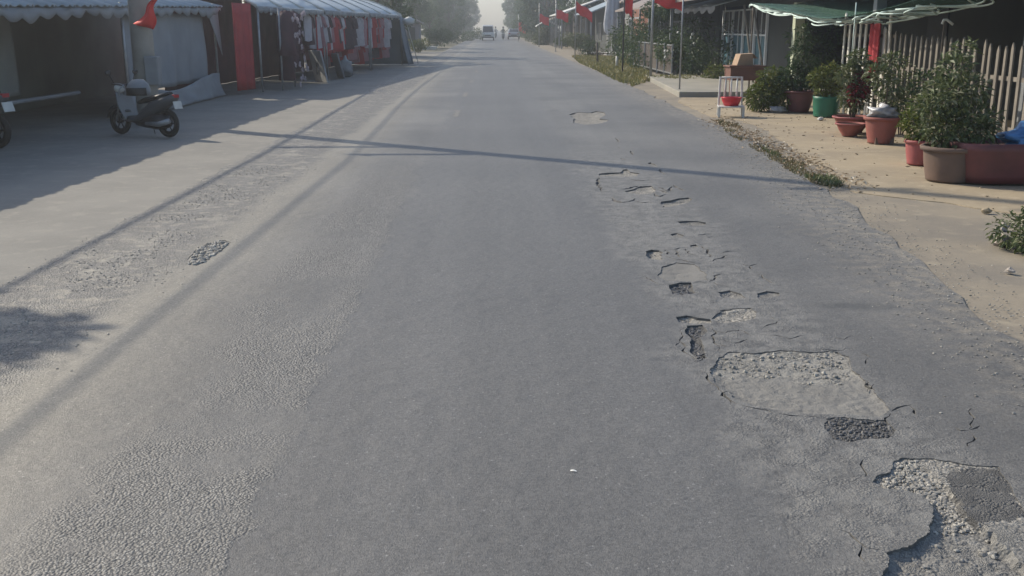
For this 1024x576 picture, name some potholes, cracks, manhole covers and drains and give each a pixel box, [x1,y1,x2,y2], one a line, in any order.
pothole [872,458,1024,576]
pothole [661,198,692,207]
pothole [599,169,640,177]
pothole [712,308,757,323]
crack [956,408,979,446]
pothole [657,262,707,281]
pothole [685,325,707,360]
pothole [676,315,712,324]
pothole [669,282,695,295]
pothole [646,250,663,260]
pothole [625,186,656,194]
pothole [569,111,608,125]
